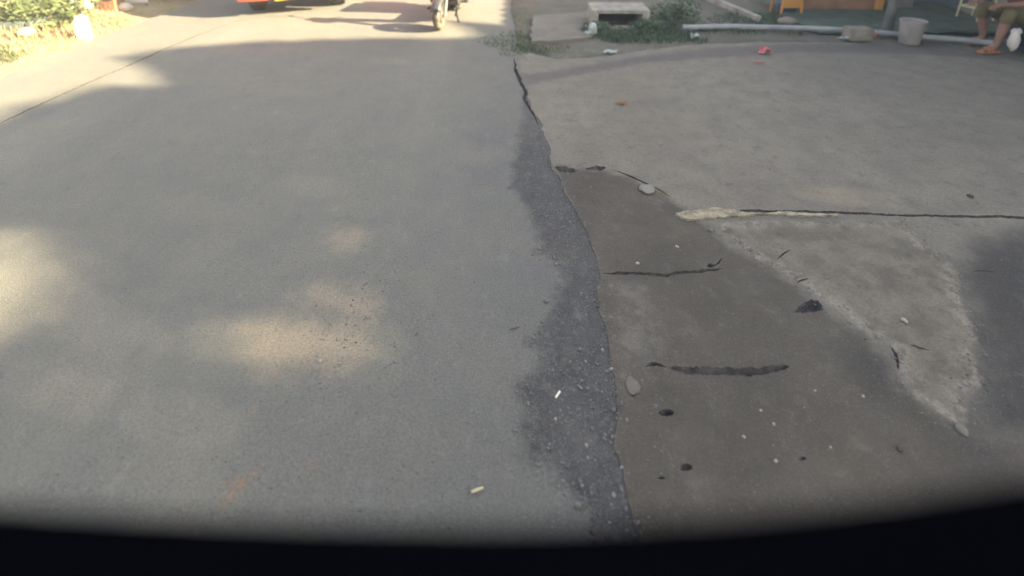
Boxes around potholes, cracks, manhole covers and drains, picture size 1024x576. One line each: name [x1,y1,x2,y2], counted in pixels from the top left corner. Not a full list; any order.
crack [514,58,538,124]
crack [604,258,722,277]
pothole [795,299,824,313]
crack [646,362,789,377]
crack [555,165,670,197]
